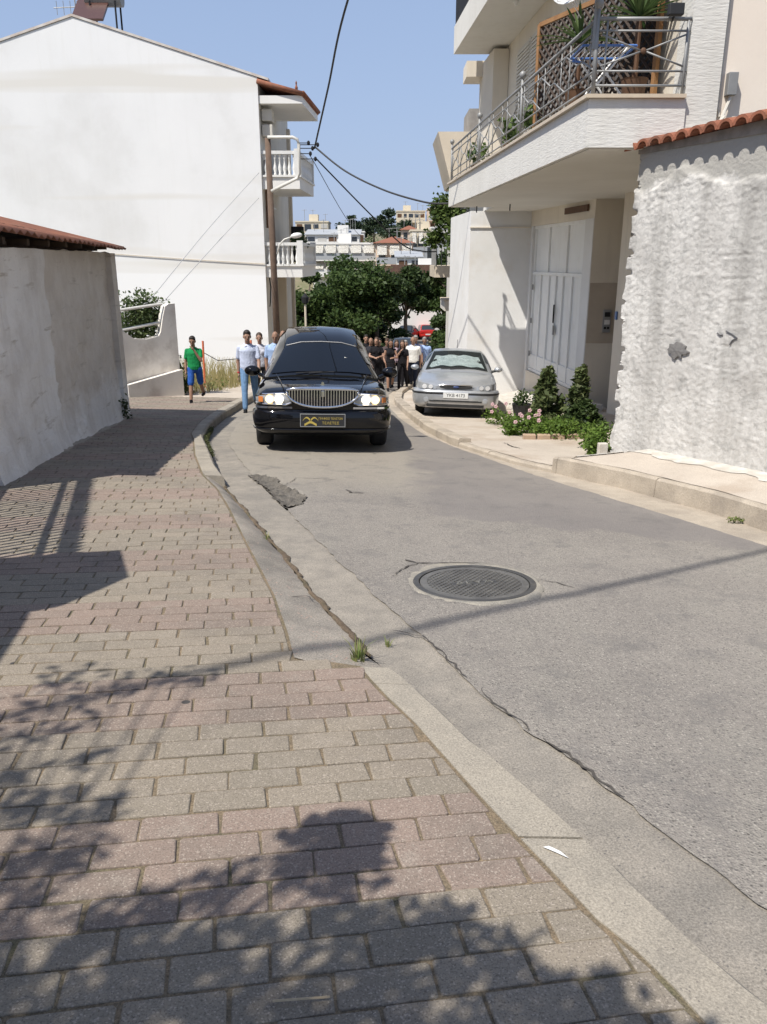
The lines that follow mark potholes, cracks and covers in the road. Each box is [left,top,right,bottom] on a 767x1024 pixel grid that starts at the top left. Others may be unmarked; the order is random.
manhole cover [408,562,544,606]
pothole [248,474,307,508]
crack [395,630,623,797]
crack [393,559,478,576]
